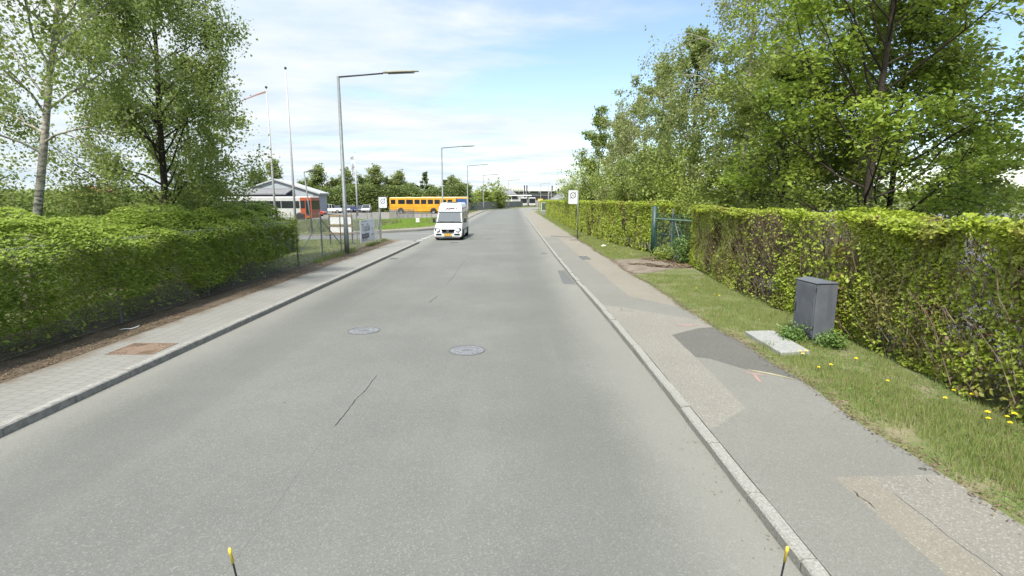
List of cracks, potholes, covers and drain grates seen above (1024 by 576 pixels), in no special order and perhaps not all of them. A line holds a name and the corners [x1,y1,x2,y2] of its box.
manhole cover [347,327,380,335]
manhole cover [449,345,485,356]
crack [335,375,377,426]
